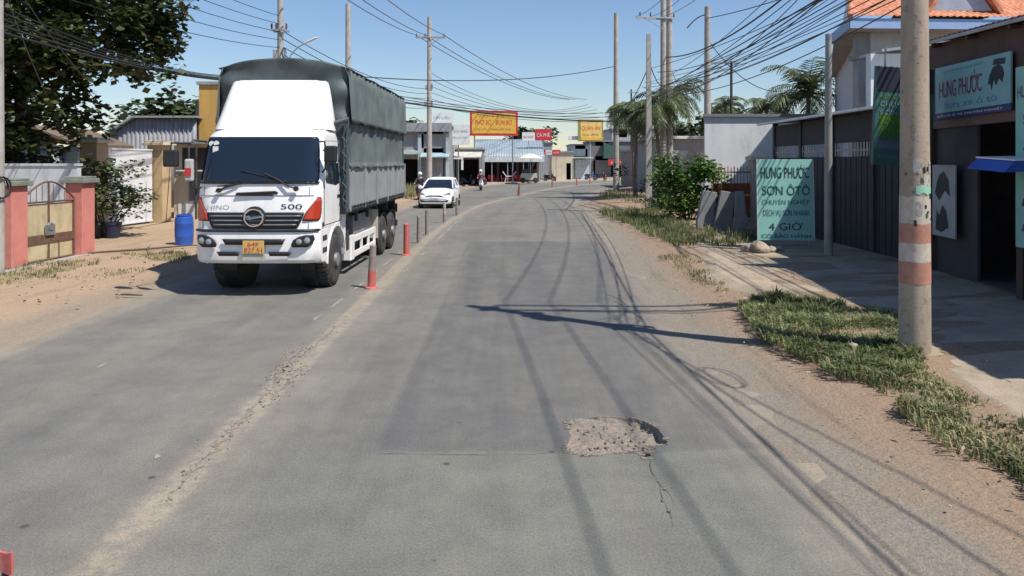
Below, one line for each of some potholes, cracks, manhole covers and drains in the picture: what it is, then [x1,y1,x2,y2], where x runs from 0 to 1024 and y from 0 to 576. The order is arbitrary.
pothole [561,416,670,460]
crack [166,325,337,502]
crack [650,460,673,526]
